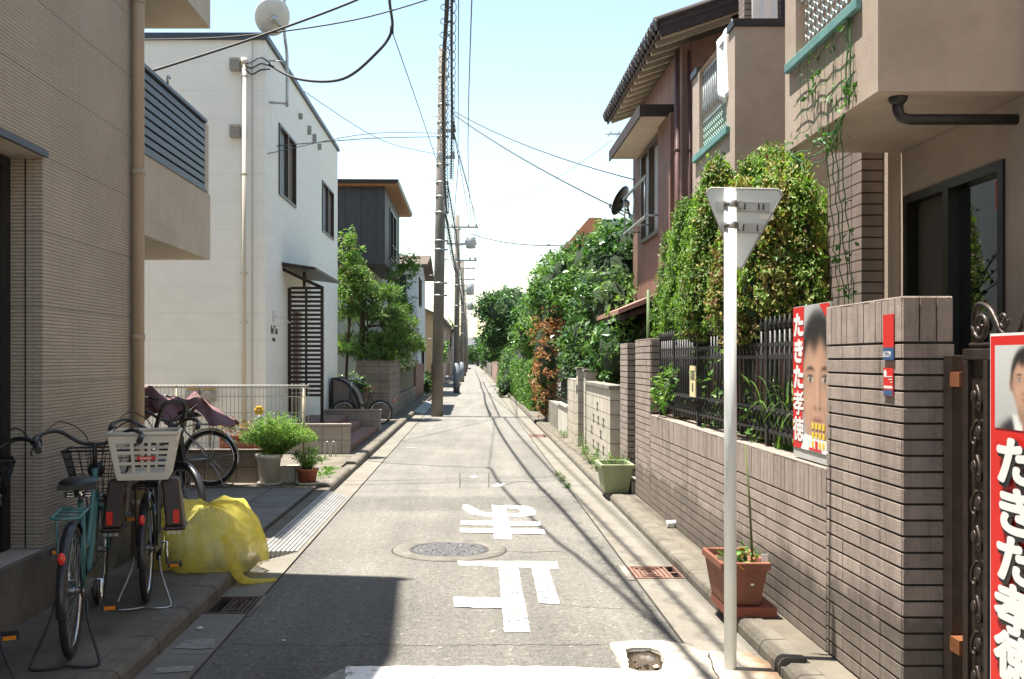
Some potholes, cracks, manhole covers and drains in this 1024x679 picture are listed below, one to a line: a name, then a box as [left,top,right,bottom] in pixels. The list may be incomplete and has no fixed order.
drain grate [628,566,685,582]
drain grate [203,596,261,614]
manhole cover [391,539,507,562]
